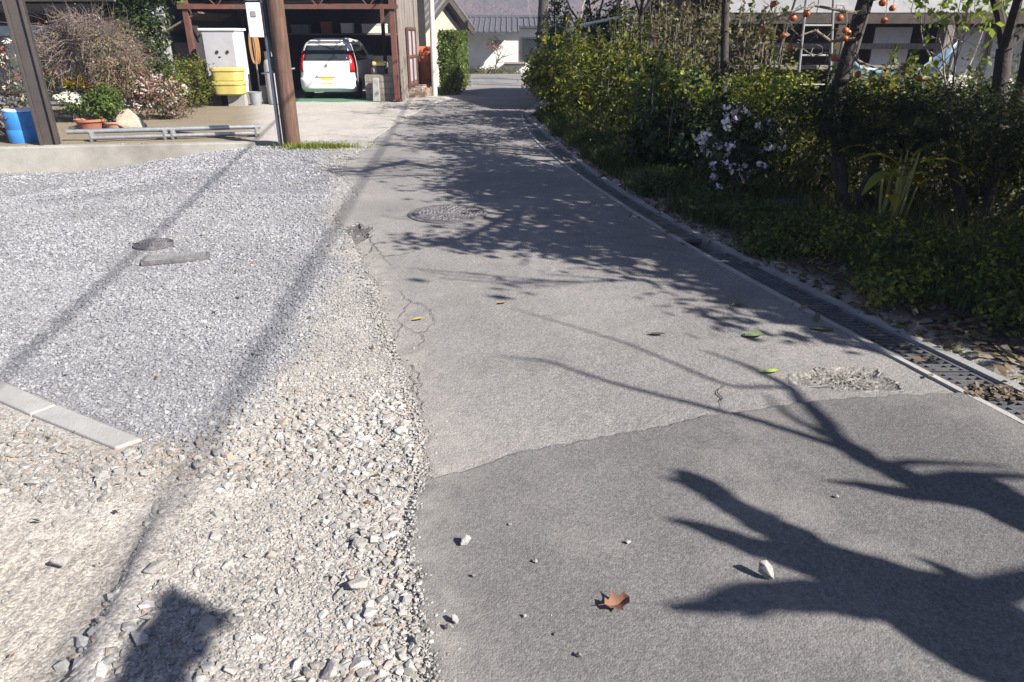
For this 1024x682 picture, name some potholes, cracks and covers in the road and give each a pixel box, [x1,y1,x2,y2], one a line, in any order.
pothole [339,222,374,250]
manhole cover [408,204,488,224]
drain grate [707,253,824,300]
drain grate [793,300,973,372]
manhole cover [132,238,174,250]
pothole [785,366,904,393]
drain grate [930,371,1024,420]
crack [397,292,434,345]
